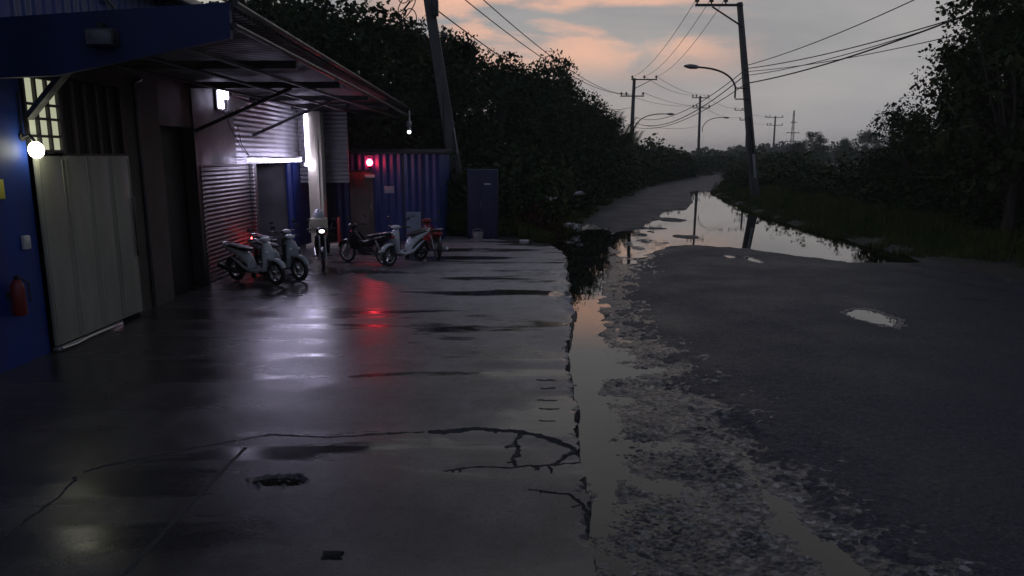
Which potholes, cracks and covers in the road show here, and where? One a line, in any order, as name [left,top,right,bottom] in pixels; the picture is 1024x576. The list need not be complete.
pothole [320,551,345,560]
pothole [245,473,310,487]
crack [0,379,590,539]
pothole [840,308,908,329]
